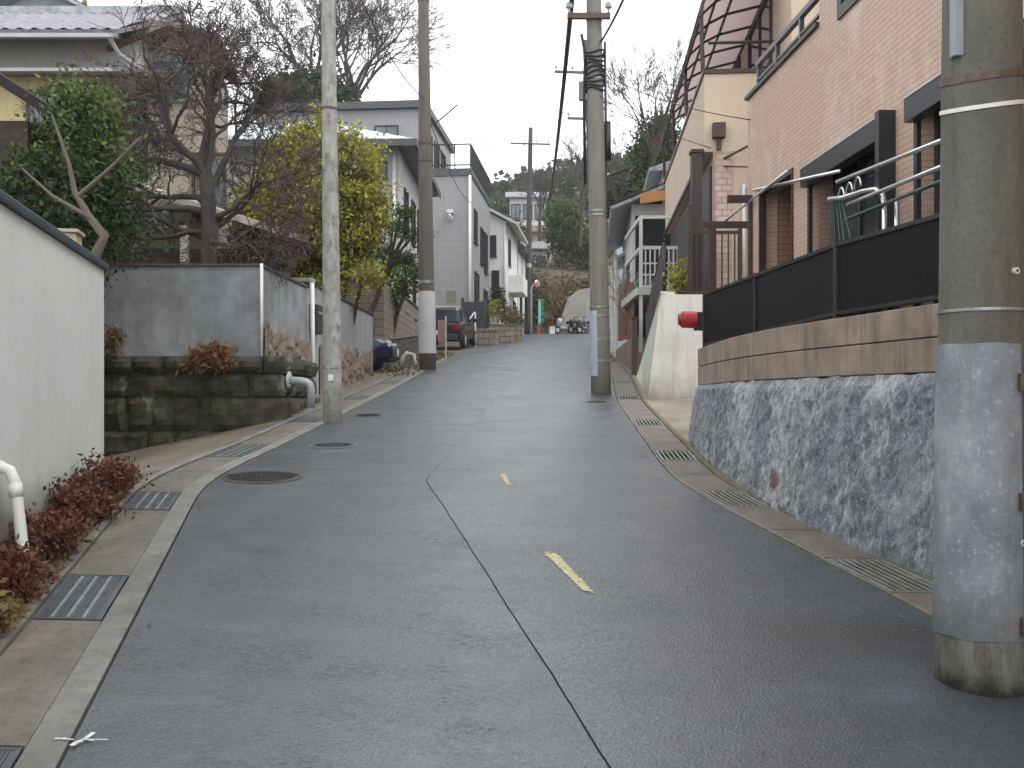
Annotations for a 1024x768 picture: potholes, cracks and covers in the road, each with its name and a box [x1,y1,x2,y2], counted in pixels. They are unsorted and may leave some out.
drain grate [656,451,698,461]
drain grate [32,575,128,623]
drain grate [123,491,181,511]
drain grate [207,444,269,457]
manhole cover [221,471,302,483]
drain grate [0,747,23,768]
drain grate [827,558,933,594]
drain grate [699,490,770,507]
